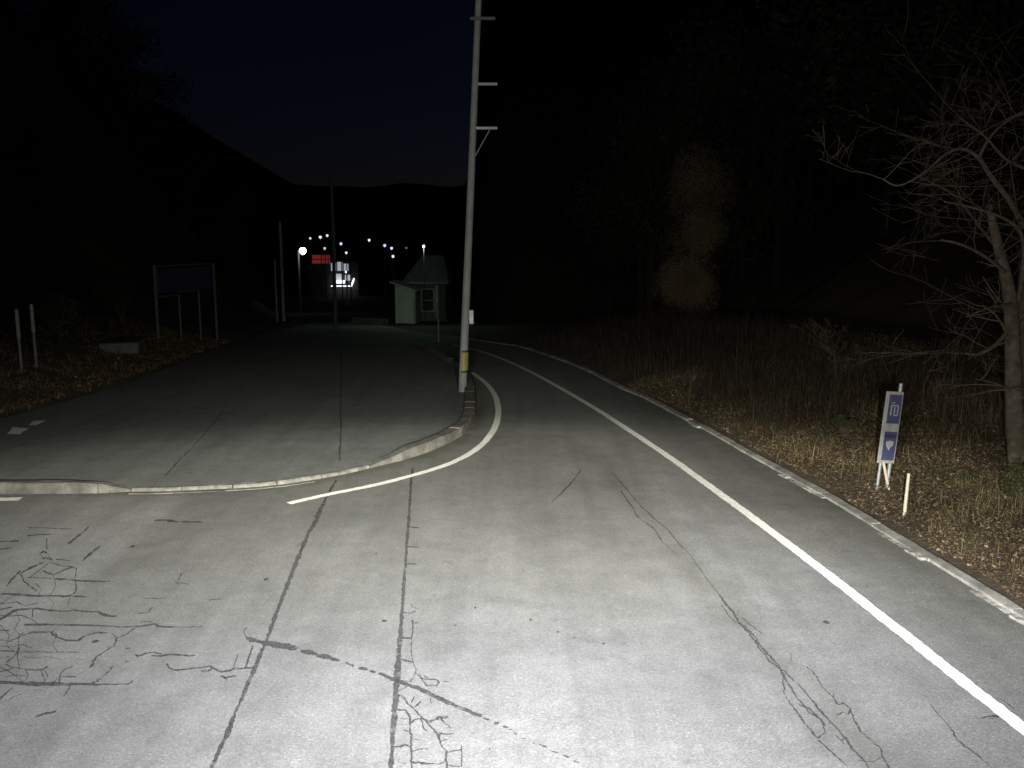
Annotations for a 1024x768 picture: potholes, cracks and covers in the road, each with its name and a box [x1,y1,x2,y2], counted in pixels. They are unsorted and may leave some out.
crack [931,705,992,768]
crack [0,527,579,768]
crack [613,473,890,768]
